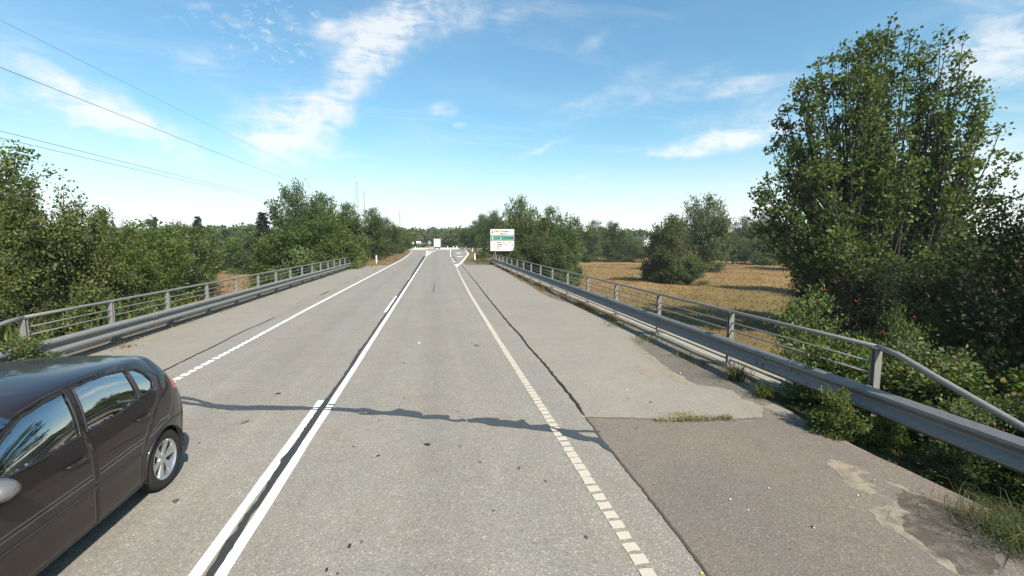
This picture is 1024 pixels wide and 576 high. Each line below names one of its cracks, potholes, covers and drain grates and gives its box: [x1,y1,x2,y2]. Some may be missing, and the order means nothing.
crack [451,250,585,415]
crack [163,317,274,371]
